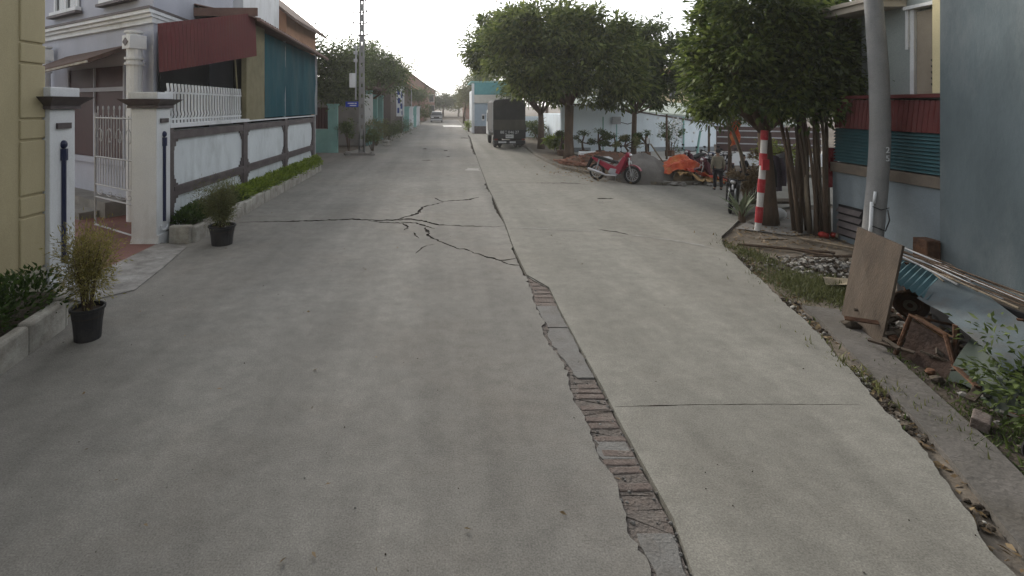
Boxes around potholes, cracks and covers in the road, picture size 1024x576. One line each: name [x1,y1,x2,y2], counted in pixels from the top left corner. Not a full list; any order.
crack [239,136,525,276]
